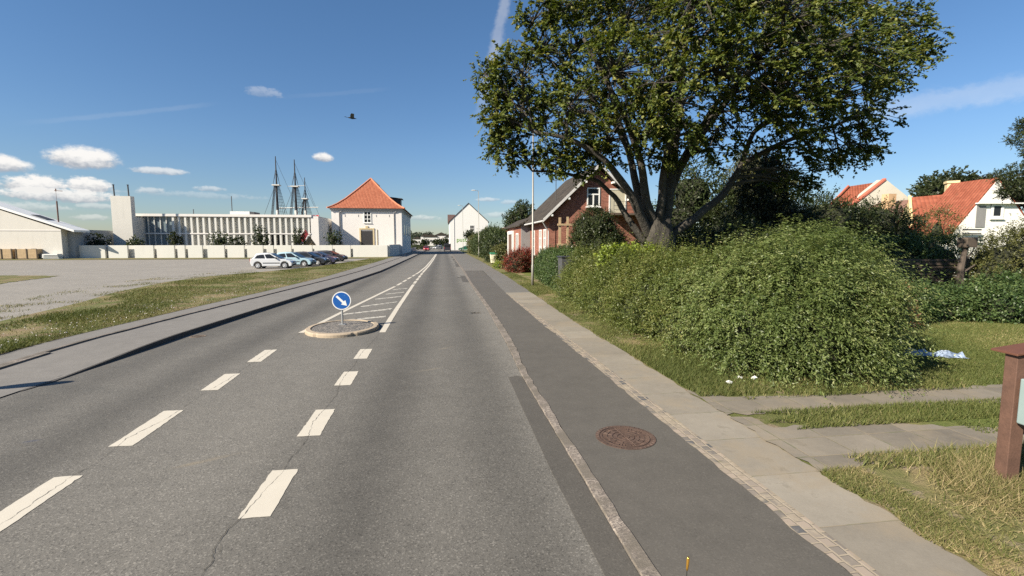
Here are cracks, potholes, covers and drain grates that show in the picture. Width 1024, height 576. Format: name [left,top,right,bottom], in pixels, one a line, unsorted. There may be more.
manhole cover [596,426,656,450]
